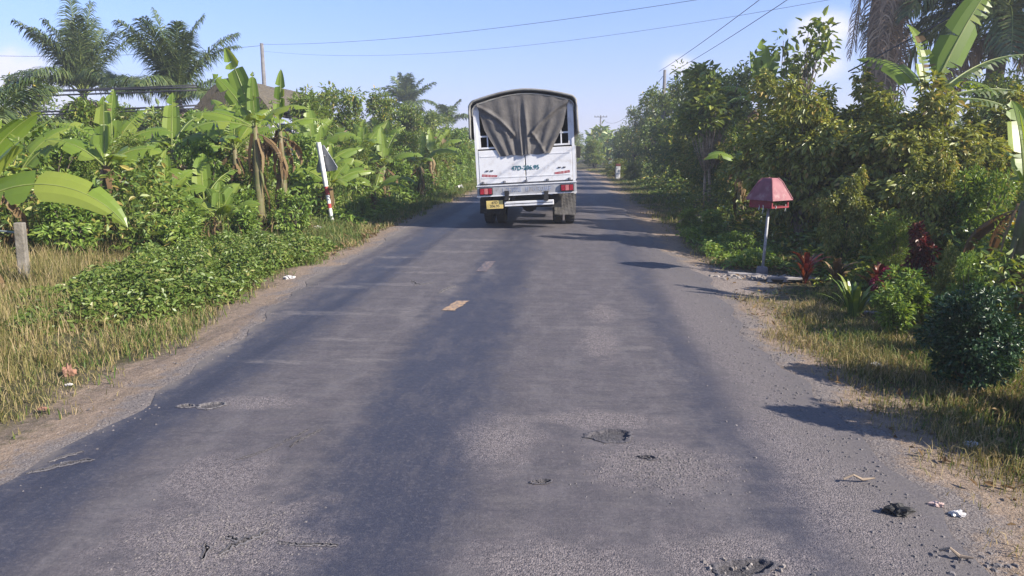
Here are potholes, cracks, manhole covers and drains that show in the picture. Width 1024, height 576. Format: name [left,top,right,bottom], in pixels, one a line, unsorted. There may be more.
crack [200,529,338,560]
pothole [196,402,227,410]
pothole [582,428,634,443]
pothole [702,556,786,576]
